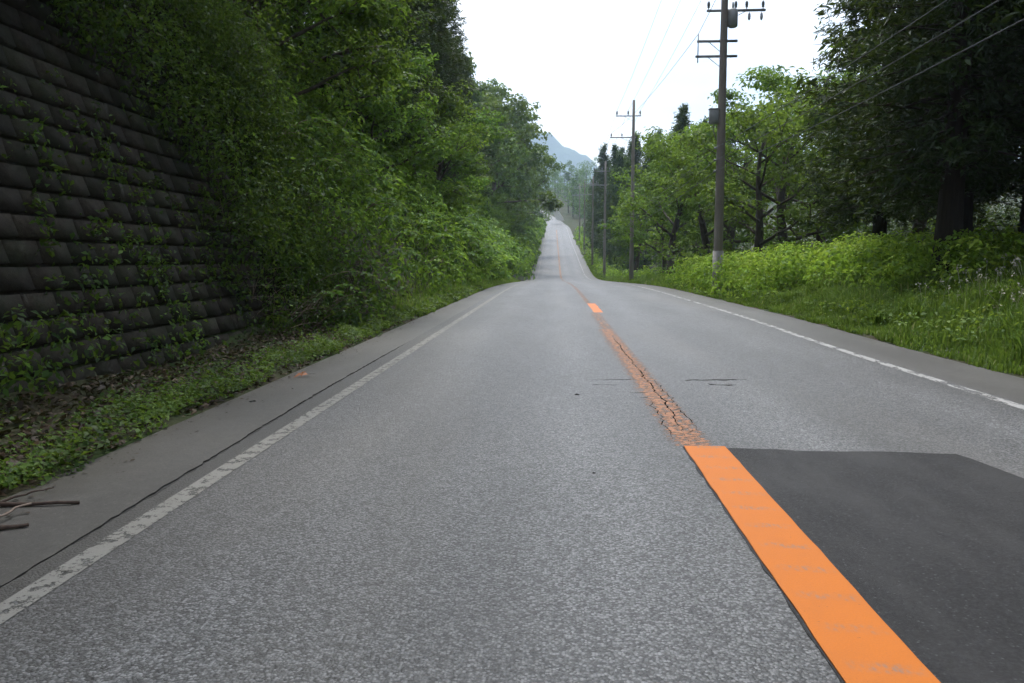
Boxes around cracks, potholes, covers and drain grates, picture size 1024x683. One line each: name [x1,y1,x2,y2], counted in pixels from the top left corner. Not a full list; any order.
crack [610,340,708,441]
